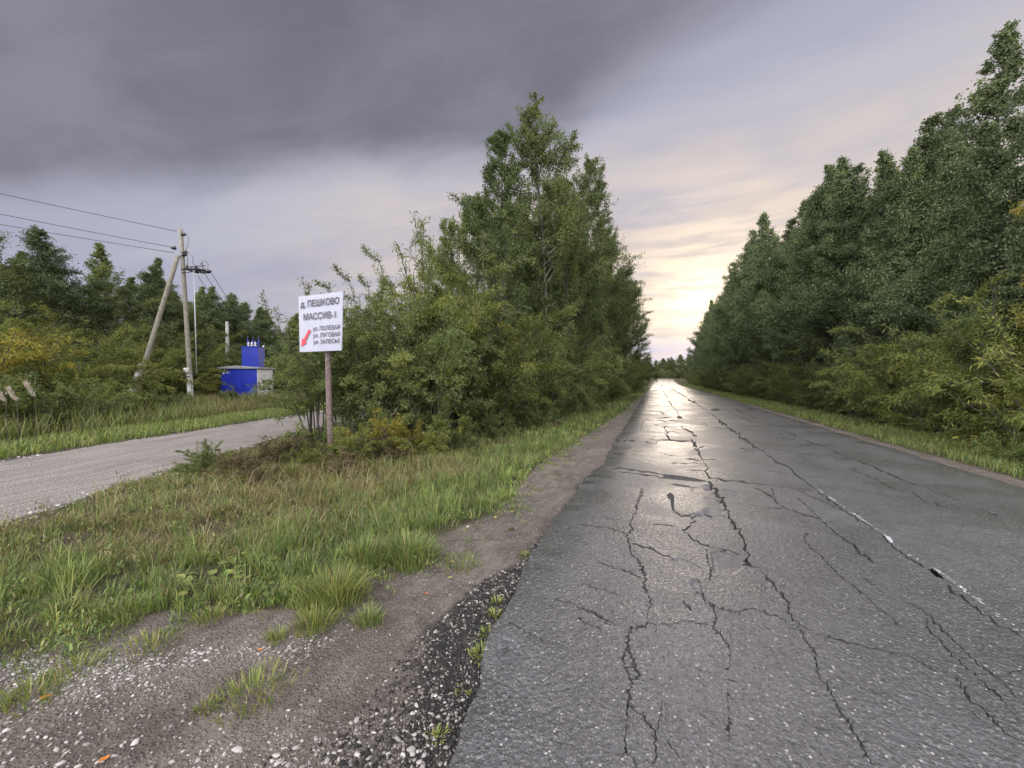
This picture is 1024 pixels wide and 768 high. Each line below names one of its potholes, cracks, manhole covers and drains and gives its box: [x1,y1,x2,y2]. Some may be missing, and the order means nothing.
crack [777,432,998,517]
crack [623,387,757,479]
crack [554,471,1023,768]
